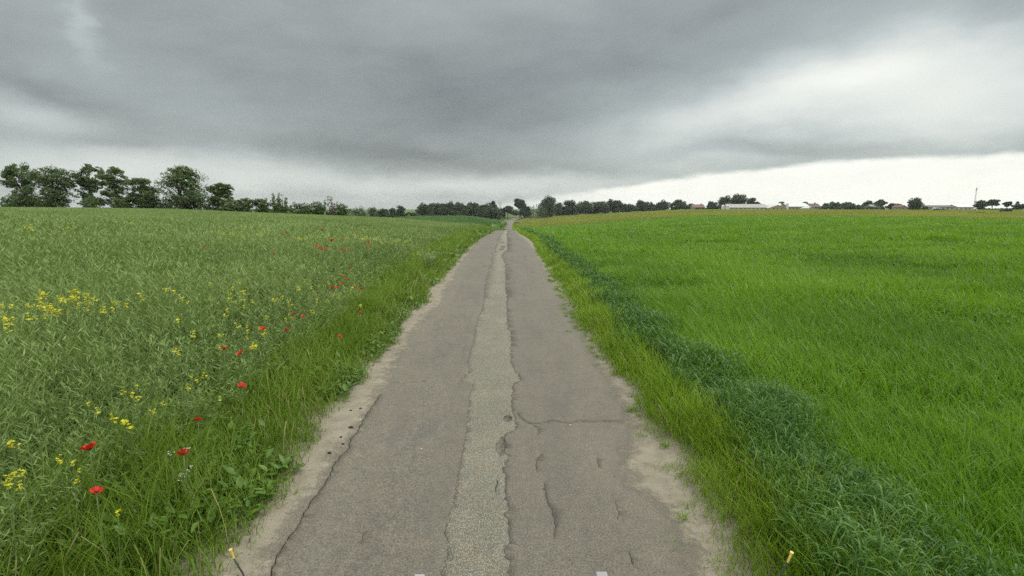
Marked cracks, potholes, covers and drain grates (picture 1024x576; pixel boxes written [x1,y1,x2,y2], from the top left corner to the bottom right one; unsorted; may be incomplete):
crack [516,412,622,435]
pothole [496,437,506,456]
